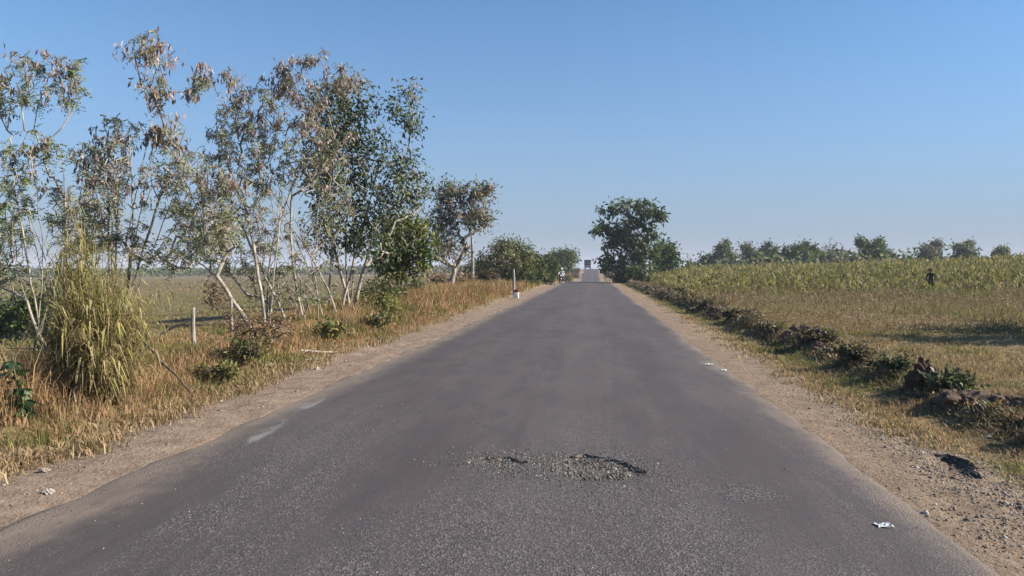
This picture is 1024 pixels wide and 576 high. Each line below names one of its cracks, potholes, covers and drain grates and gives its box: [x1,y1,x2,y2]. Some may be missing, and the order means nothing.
pothole [550,454,646,481]
pothole [470,456,527,467]
